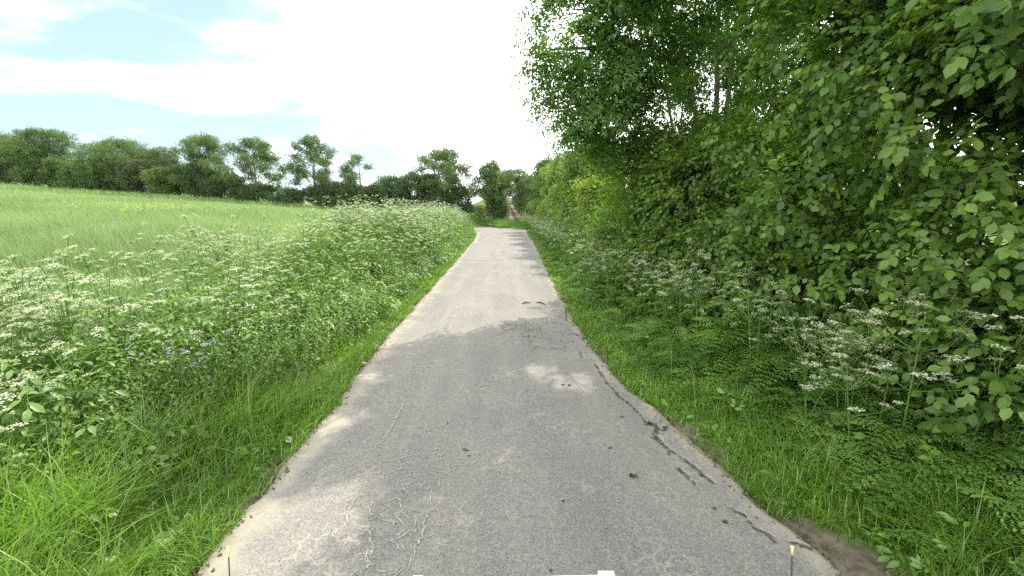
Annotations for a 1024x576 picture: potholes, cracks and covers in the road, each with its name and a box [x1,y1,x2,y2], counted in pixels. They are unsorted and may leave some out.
crack [490,292,714,486]
crack [328,362,475,576]
